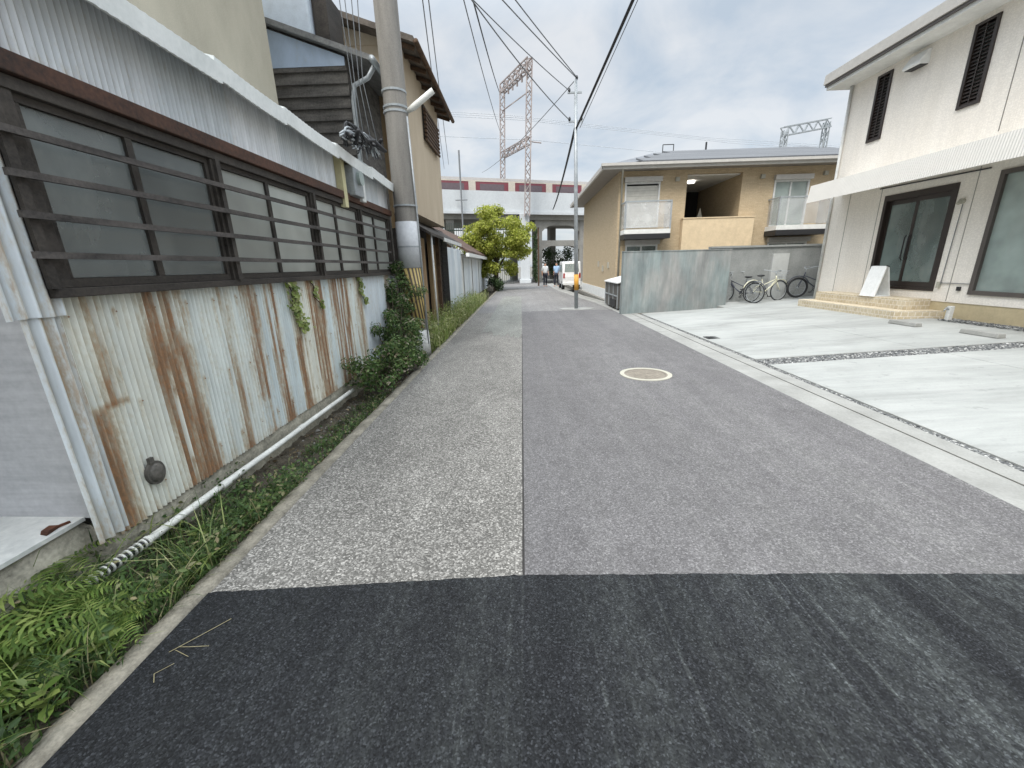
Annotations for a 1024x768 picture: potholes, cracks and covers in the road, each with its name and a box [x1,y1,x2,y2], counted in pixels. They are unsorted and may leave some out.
manhole cover [620,368,672,381]
